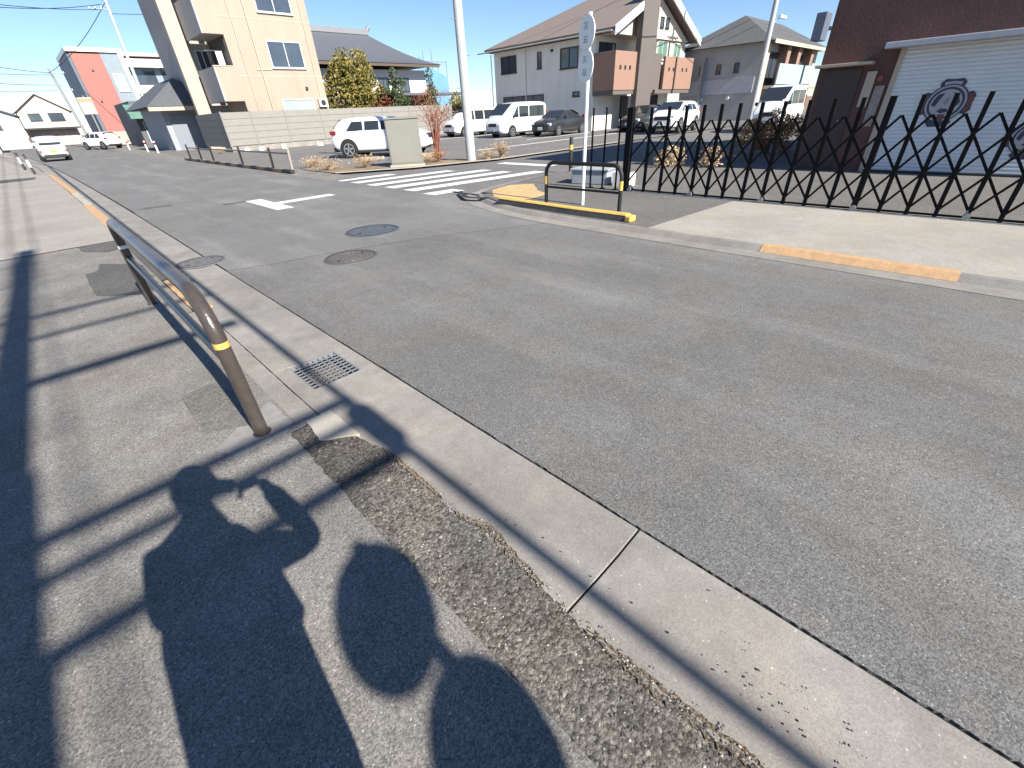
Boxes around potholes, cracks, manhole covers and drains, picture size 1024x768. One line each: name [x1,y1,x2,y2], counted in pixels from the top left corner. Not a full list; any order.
drain grate [289,351,362,390]
manhole cover [174,255,226,269]
manhole cover [323,249,378,265]
manhole cover [345,224,400,237]
